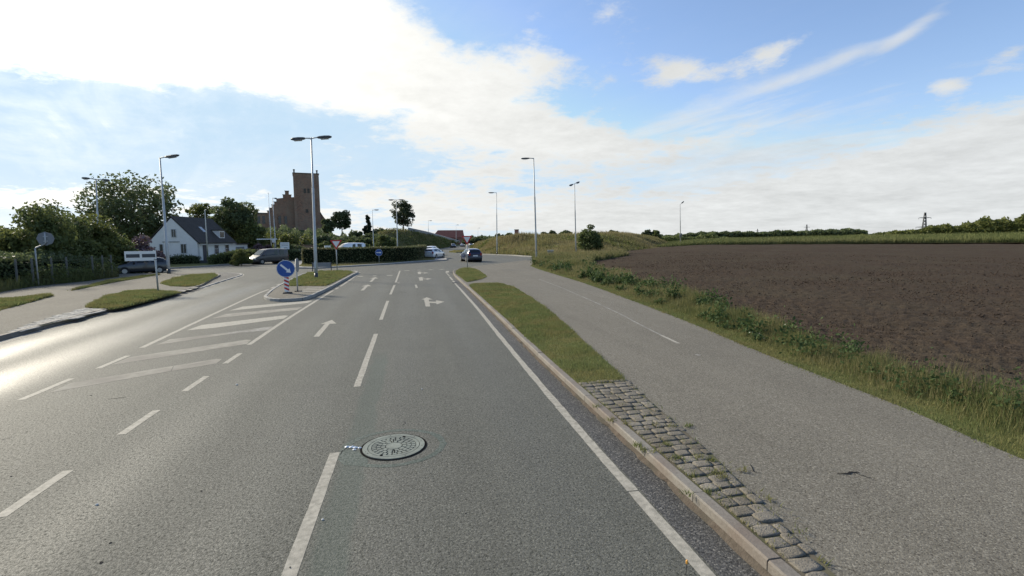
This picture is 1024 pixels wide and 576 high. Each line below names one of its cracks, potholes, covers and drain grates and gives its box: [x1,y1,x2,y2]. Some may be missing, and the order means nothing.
manhole cover [360,434,427,460]
